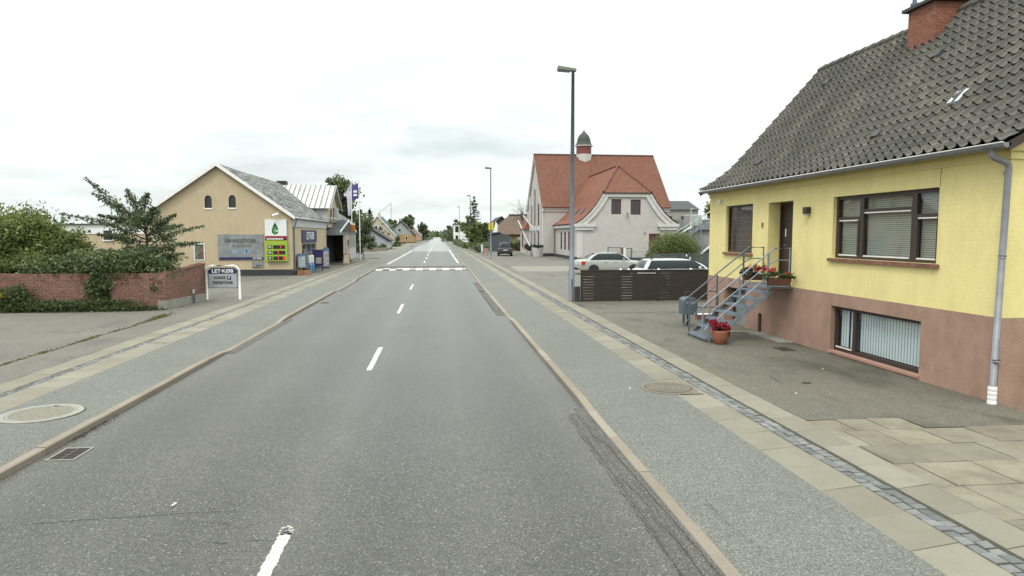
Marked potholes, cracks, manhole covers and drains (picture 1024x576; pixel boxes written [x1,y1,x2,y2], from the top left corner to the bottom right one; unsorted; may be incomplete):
manhole cover [640,381,701,395]
manhole cover [0,404,86,424]
drain grate [44,447,94,461]
crack [19,511,309,543]
